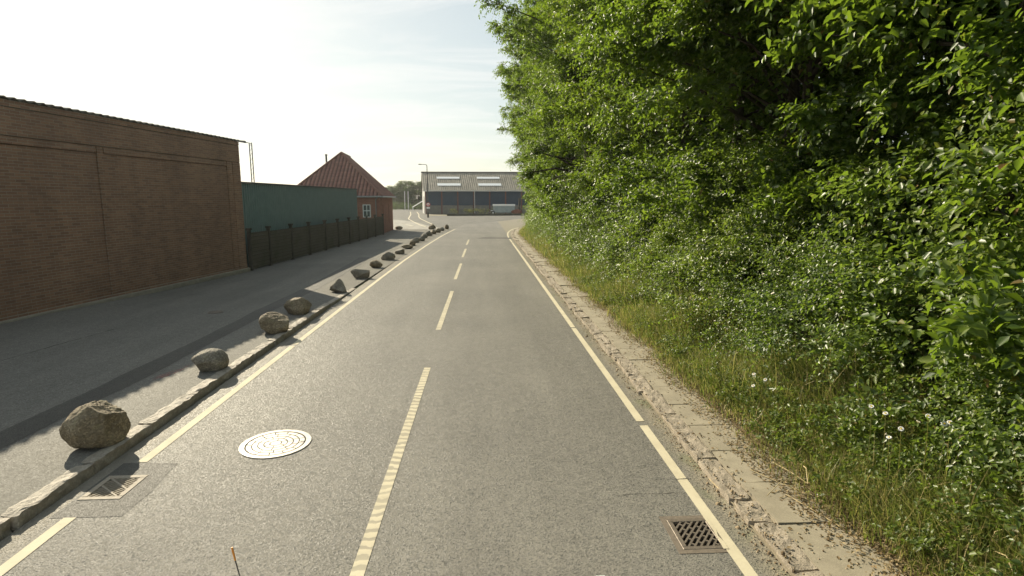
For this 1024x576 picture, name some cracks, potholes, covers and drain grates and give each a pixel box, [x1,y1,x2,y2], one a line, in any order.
drain grate [659,515,729,554]
manhole cover [239,430,311,459]
drain grate [77,475,149,500]
